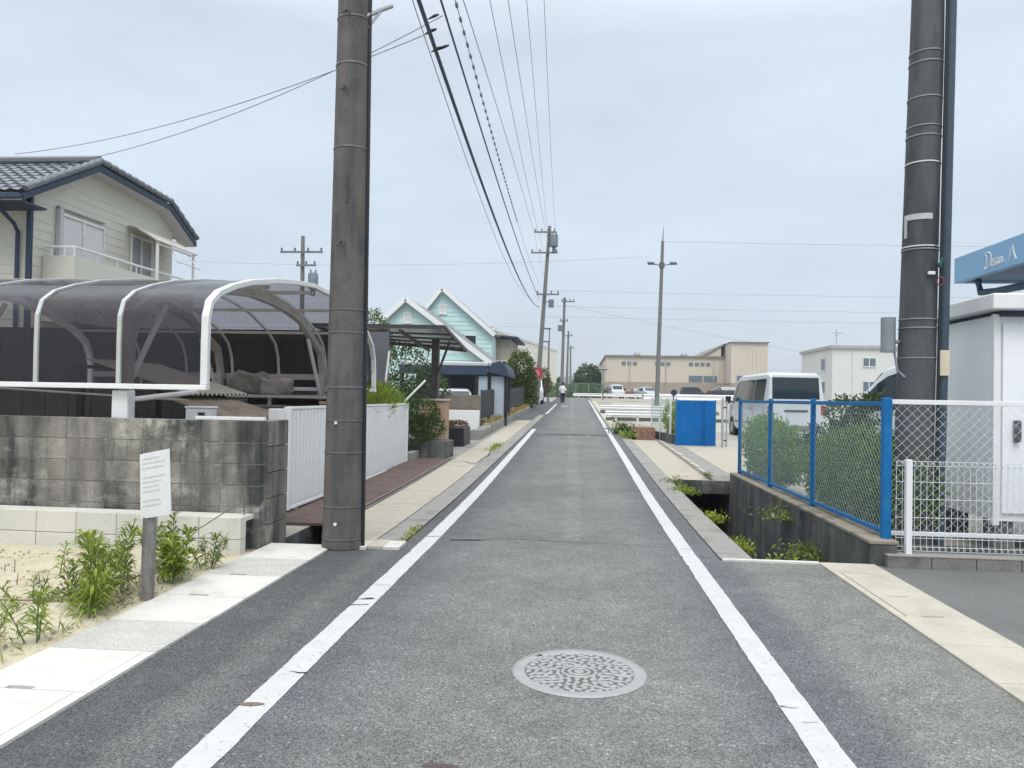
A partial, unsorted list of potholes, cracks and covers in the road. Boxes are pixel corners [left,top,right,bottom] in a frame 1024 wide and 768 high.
manhole cover [512,649,647,698]
